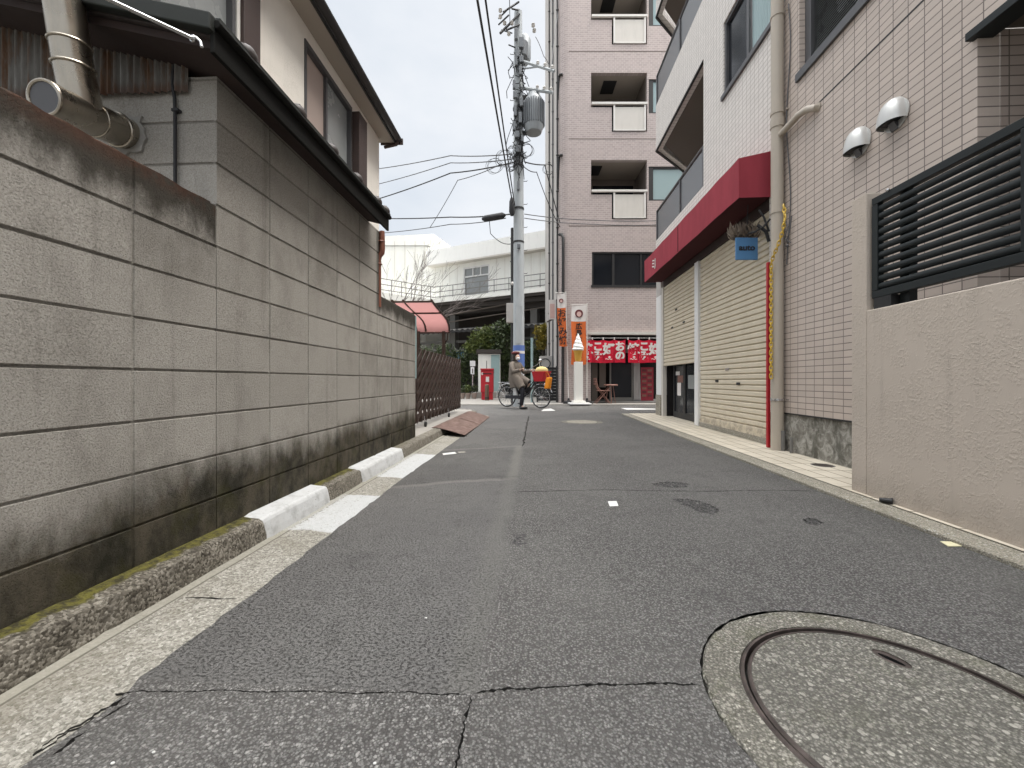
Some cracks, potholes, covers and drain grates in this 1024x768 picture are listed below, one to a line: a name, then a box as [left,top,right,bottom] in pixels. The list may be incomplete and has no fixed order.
crack [33,682,701,768]
manhole cover [700,612,1024,768]
